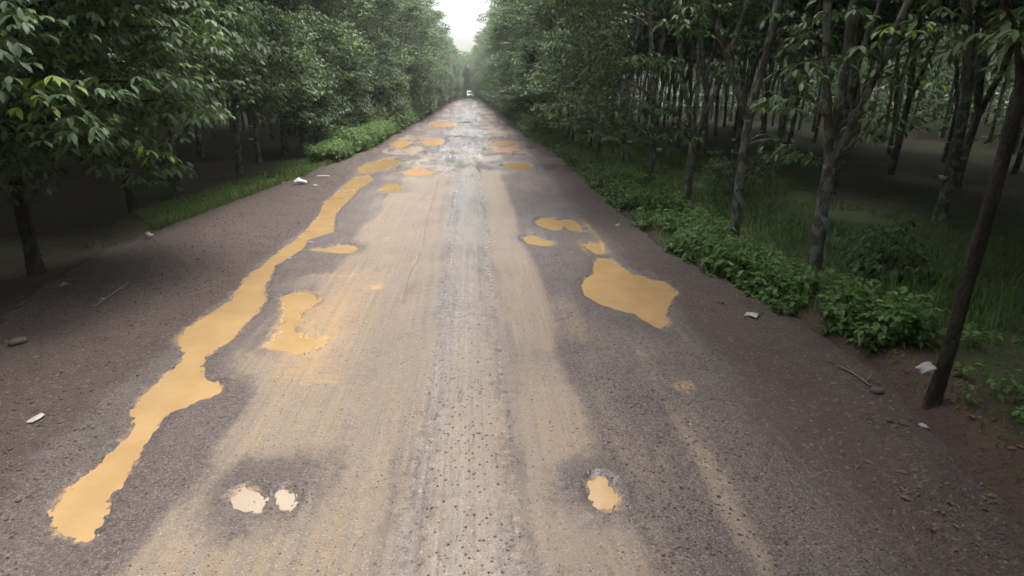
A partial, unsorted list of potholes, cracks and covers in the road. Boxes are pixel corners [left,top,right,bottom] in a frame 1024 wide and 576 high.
crack [378,131,528,305]
pothole [14,174,380,561]
pothole [567,460,643,524]
